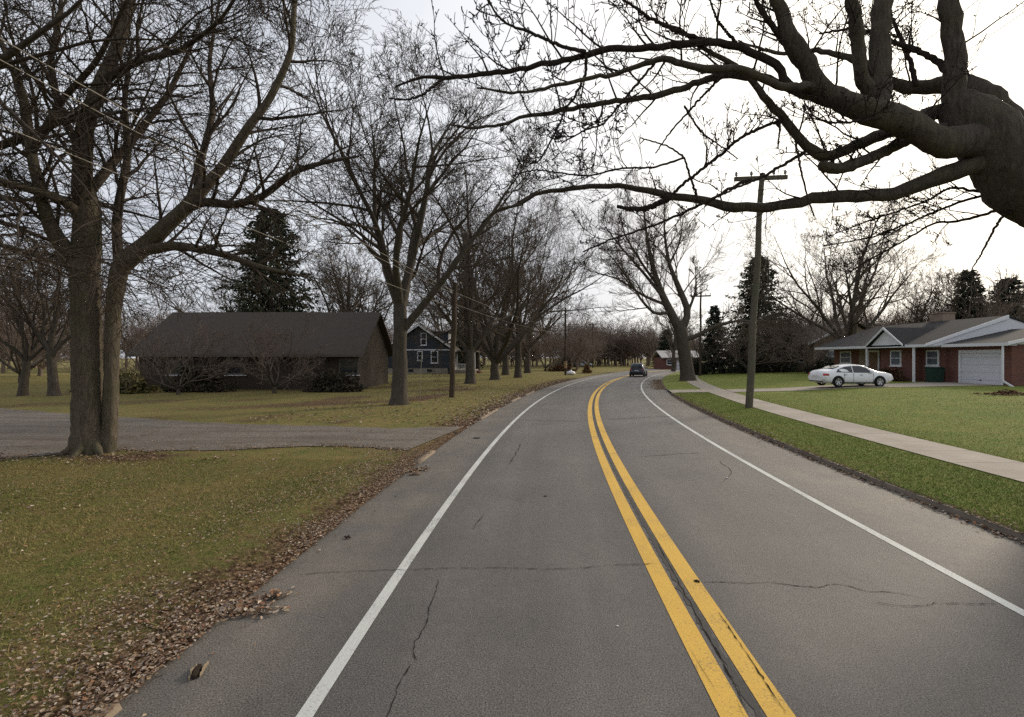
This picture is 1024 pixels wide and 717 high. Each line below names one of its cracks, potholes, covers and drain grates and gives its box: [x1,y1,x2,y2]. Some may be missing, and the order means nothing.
crack [308,563,653,717]
crack [704,581,993,606]
